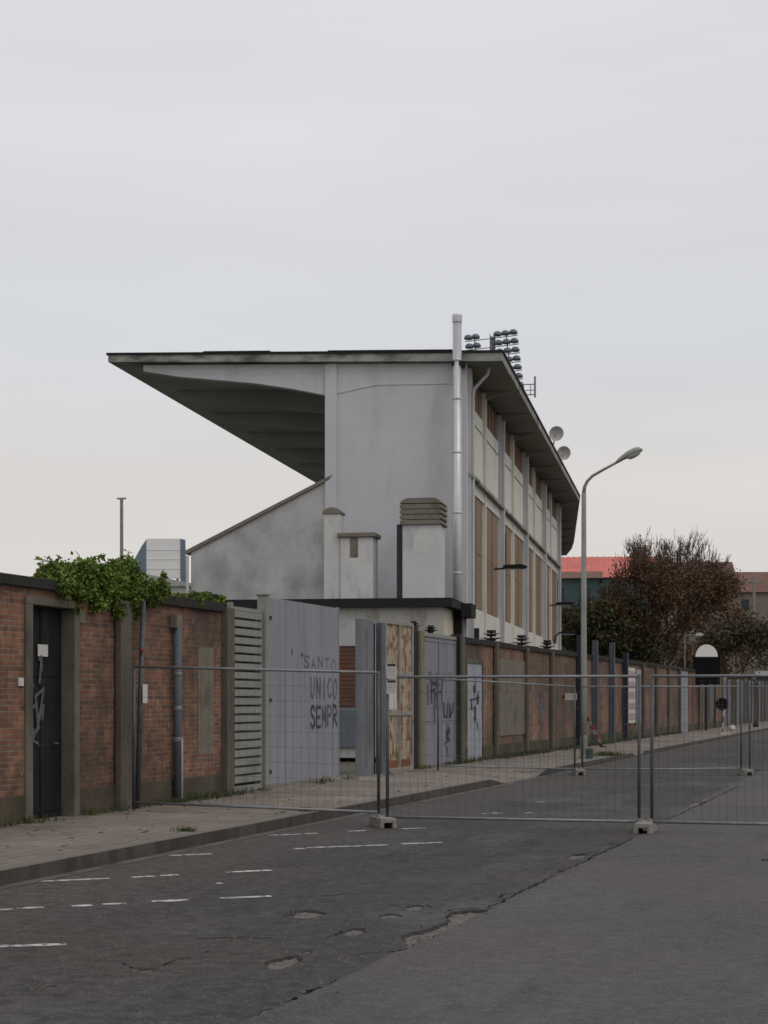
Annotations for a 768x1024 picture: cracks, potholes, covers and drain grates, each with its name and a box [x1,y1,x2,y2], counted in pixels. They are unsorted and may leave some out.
crack [259,979,337,1014]
crack [123,935,264,969]
pothole [400,906,495,947]
crack [389,876,551,913]
pothole [289,910,328,918]
pothole [339,928,368,936]
pothole [264,955,303,970]
